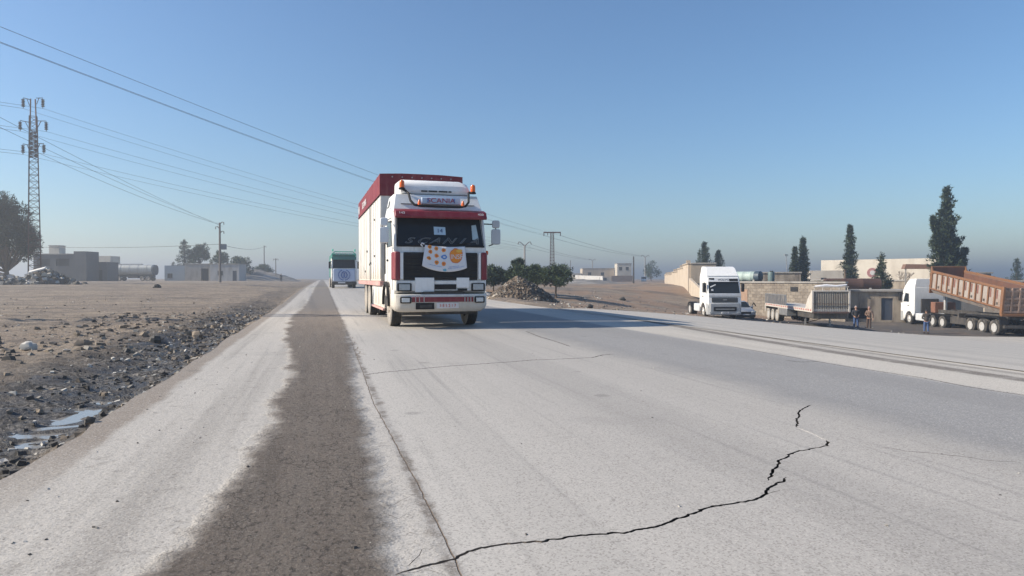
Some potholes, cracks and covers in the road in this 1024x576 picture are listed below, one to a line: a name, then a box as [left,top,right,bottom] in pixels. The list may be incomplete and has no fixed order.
crack [366,331,610,375]
crack [351,338,830,575]
